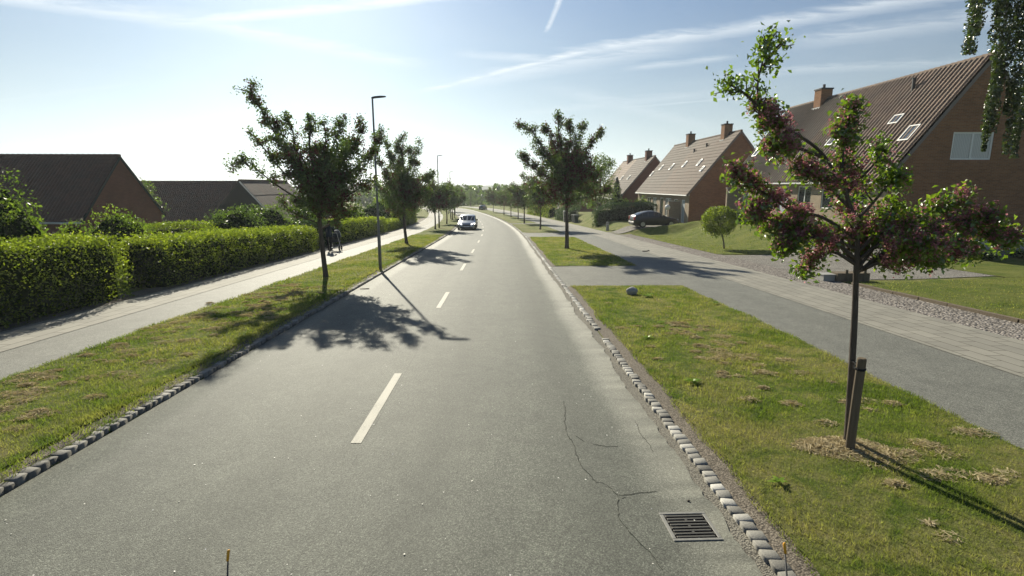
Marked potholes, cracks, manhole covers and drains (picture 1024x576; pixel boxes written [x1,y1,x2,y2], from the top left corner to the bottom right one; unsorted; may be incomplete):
drain grate [659,511,724,542]
crack [563,401,663,570]
